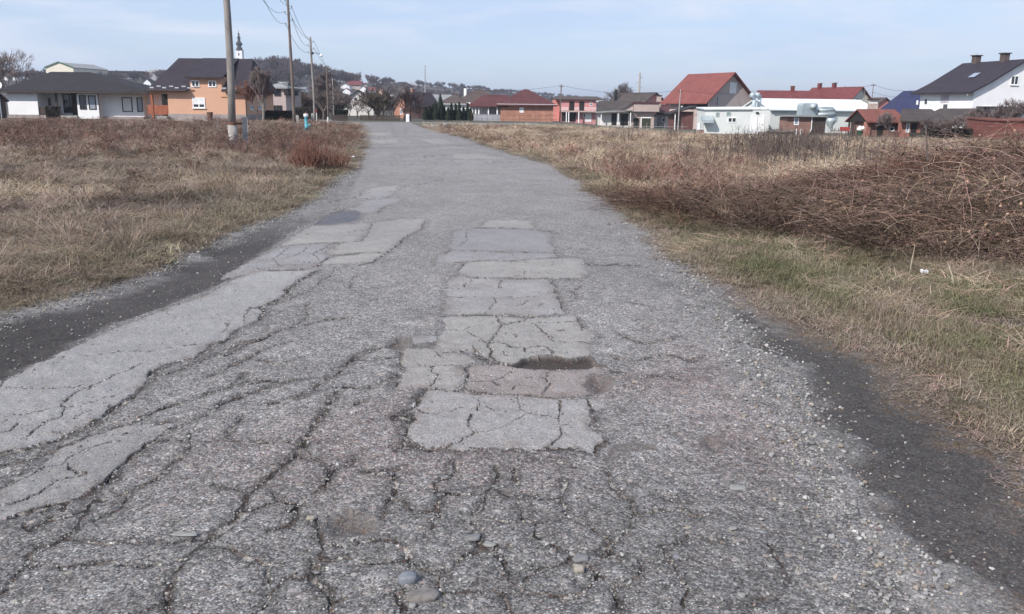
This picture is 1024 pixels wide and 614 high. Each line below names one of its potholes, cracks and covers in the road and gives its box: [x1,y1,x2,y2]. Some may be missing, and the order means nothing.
crack [0,226,791,614]
pothole [511,354,608,370]
